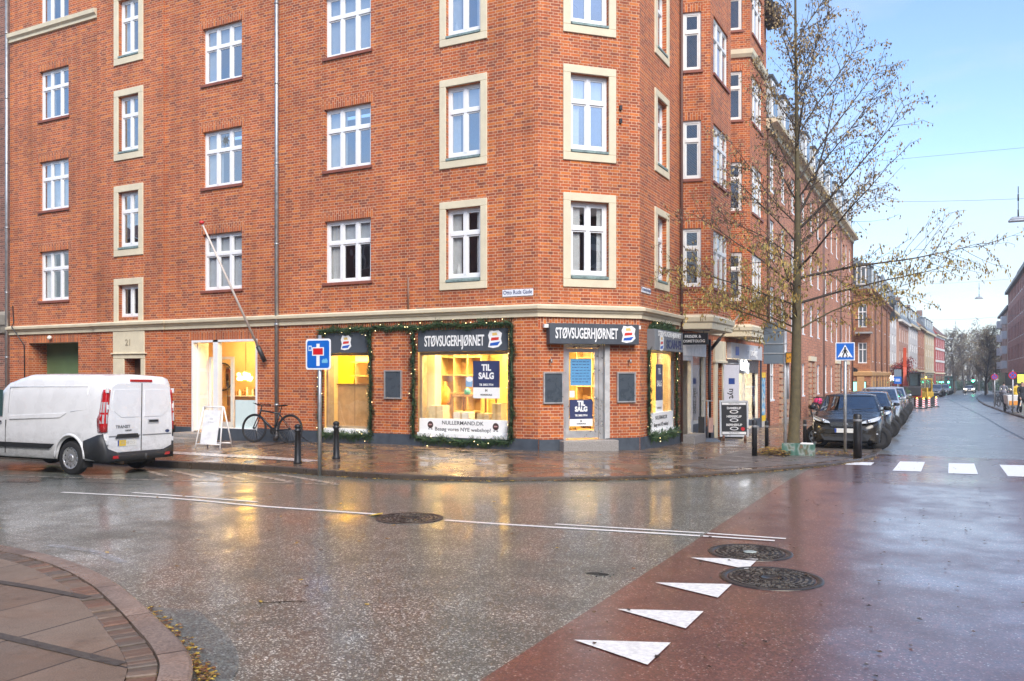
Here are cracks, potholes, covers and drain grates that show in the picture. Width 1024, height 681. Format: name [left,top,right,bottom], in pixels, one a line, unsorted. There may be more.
manhole cover [708,544,793,562]
manhole cover [375,512,444,524]
manhole cover [719,566,825,591]
